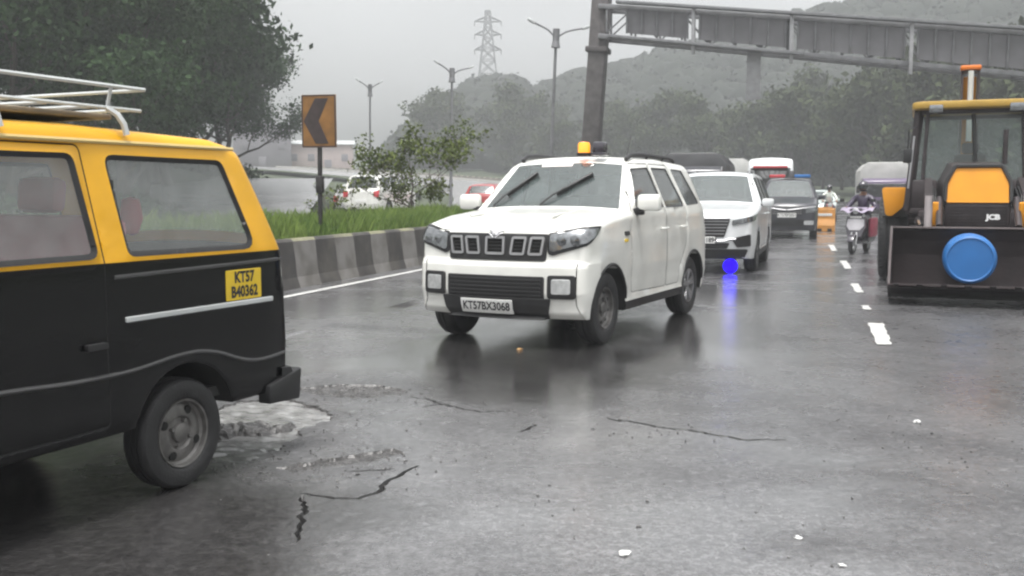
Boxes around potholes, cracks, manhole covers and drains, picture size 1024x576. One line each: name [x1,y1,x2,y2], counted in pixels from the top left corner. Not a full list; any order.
pothole [275,448,403,473]
crack [294,465,420,542]
pothole [210,400,333,463]
pothole [300,384,407,399]
crack [607,418,786,441]
crack [410,396,536,432]
